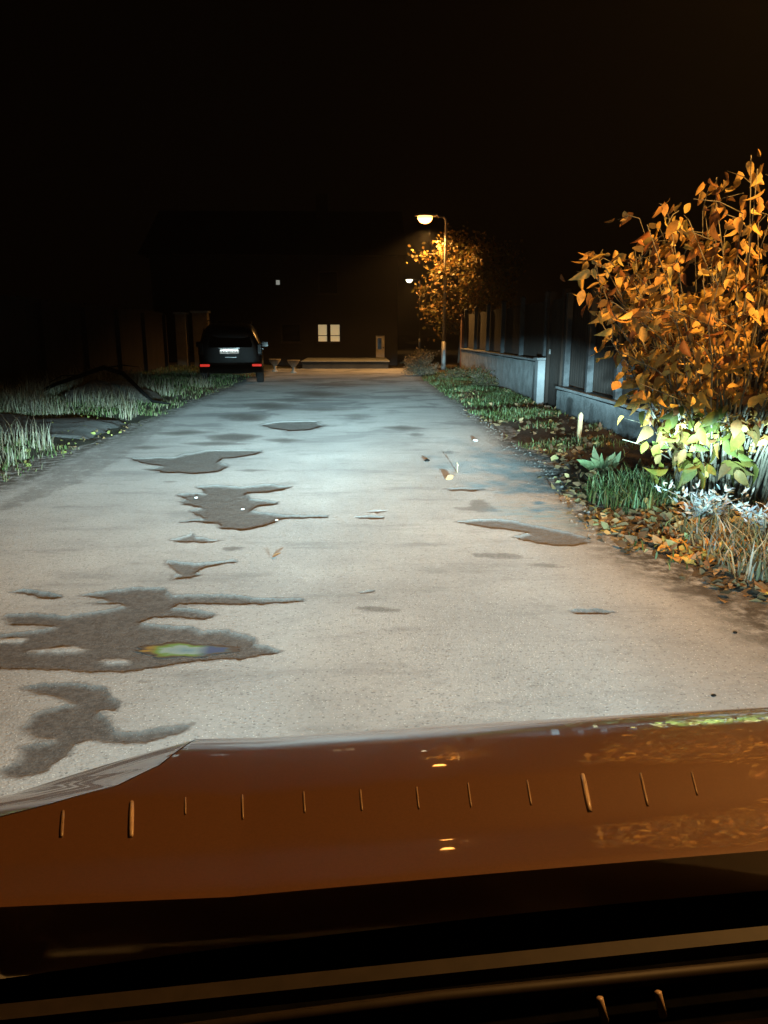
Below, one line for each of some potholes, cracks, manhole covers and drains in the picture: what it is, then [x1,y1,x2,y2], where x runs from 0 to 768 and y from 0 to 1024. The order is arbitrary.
pothole [457,519,591,546]
pothole [0,683,194,778]
pothole [261,421,325,431]
pothole [165,559,237,580]
pothole [0,587,304,673]
pothole [177,484,328,531]
pothole [117,450,262,474]
pothole [170,533,221,543]
